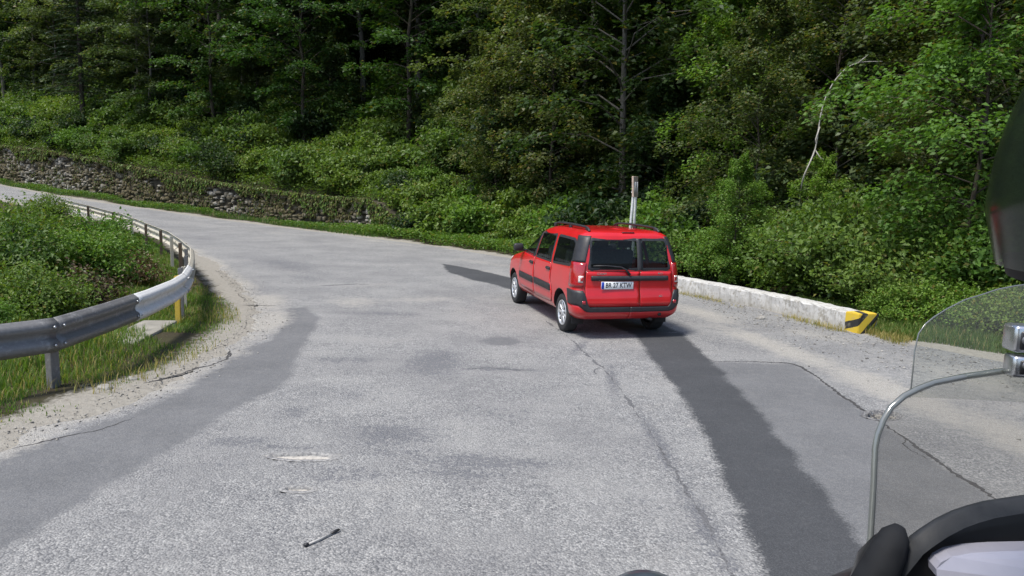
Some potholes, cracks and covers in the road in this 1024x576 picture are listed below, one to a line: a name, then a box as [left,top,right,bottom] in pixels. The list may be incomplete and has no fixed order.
pothole [861,410,902,421]
crack [12,418,132,449]
crack [146,351,232,384]
